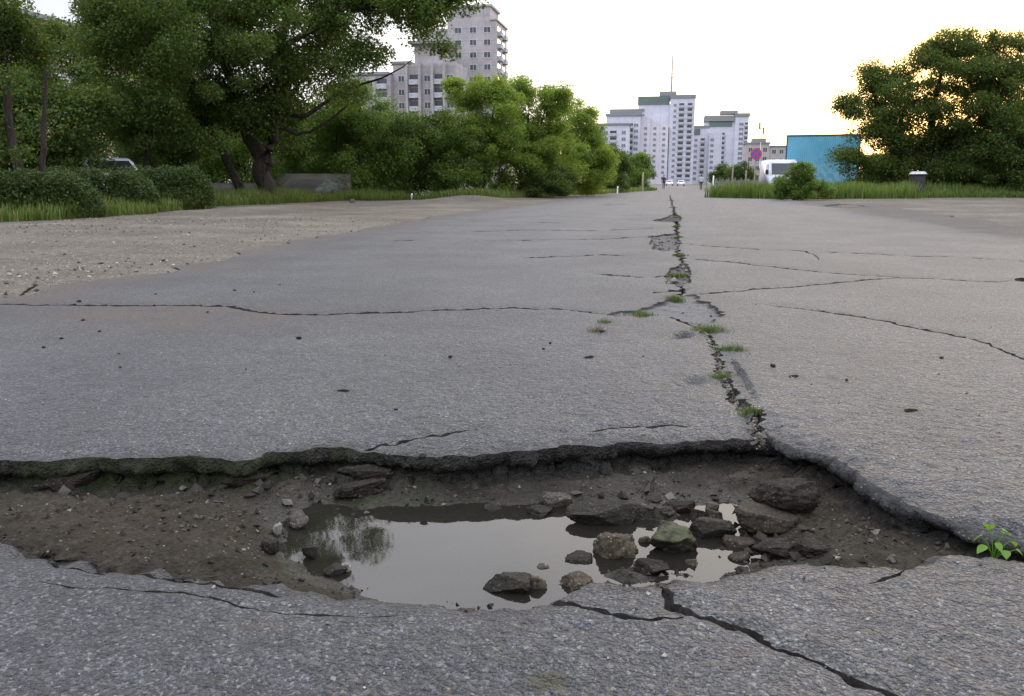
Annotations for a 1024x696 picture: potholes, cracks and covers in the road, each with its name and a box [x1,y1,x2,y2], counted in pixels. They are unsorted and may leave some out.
pothole [0,433,1024,613]
crack [0,284,605,315]
crack [593,424,687,432]
crack [364,429,480,451]
crack [689,244,1006,294]
crack [552,570,905,696]
crack [475,228,653,258]
crack [599,274,684,294]
crack [775,306,1024,360]
